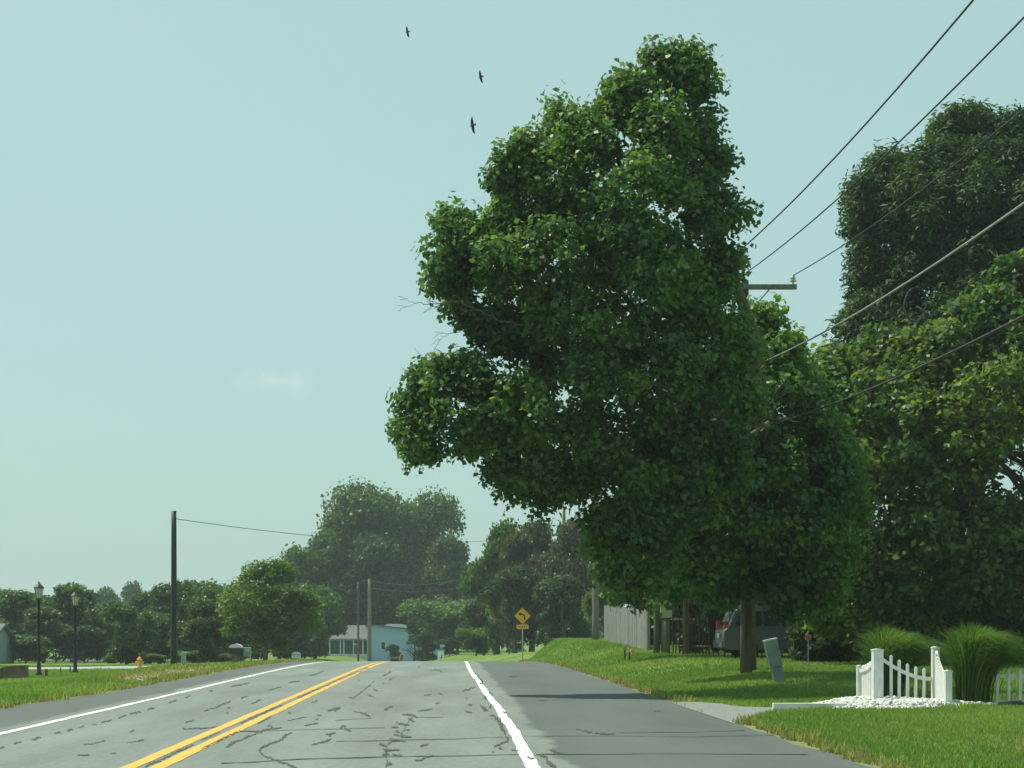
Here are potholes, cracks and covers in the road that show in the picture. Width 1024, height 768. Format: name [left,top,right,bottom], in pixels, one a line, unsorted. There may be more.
crack [0,662,793,768]
